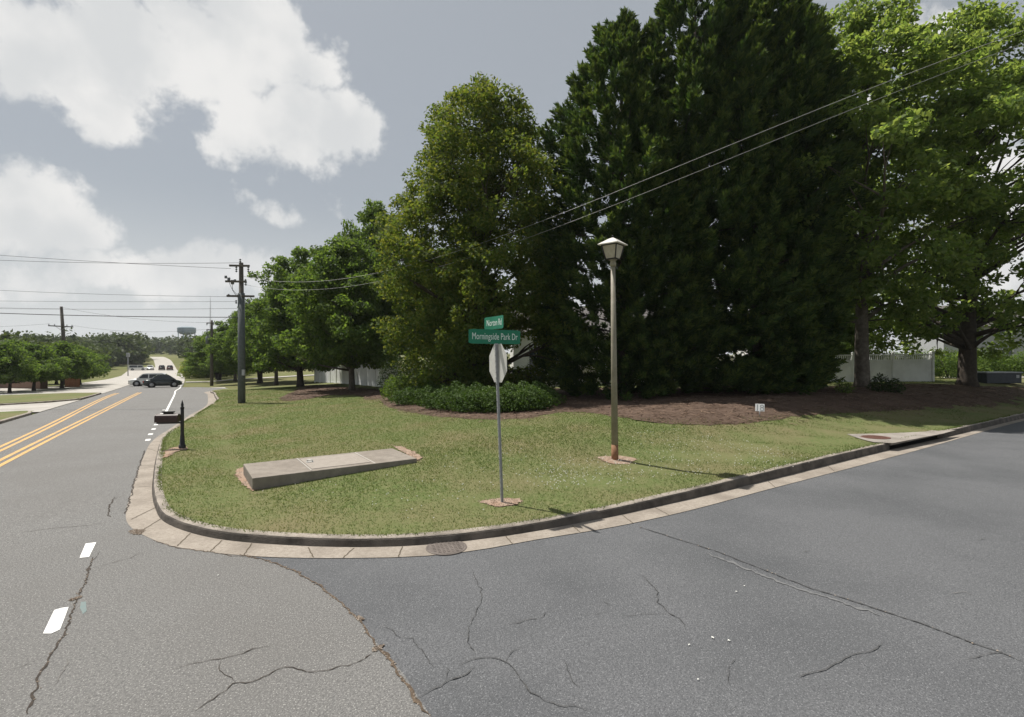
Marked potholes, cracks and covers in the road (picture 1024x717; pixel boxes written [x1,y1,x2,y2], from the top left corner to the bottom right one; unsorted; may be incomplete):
crack [634,577,685,627]
crack [18,552,143,714]
manhole cover [426,541,467,556]
crack [178,646,372,709]
crack [390,574,585,709]
crack [798,643,882,677]
